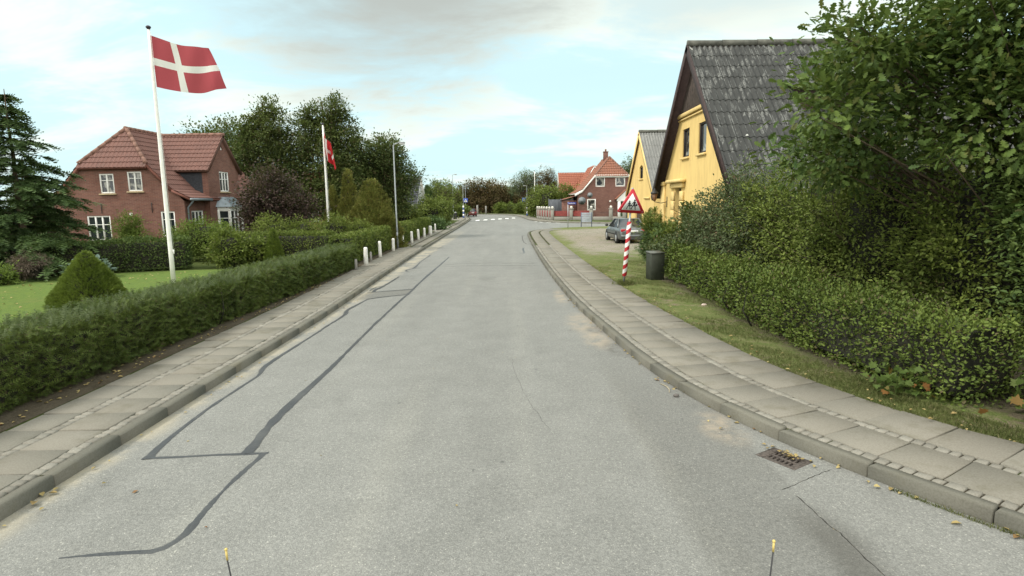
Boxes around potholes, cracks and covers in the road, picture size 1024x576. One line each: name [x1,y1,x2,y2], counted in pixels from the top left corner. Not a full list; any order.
drain grate [755,447,813,470]
